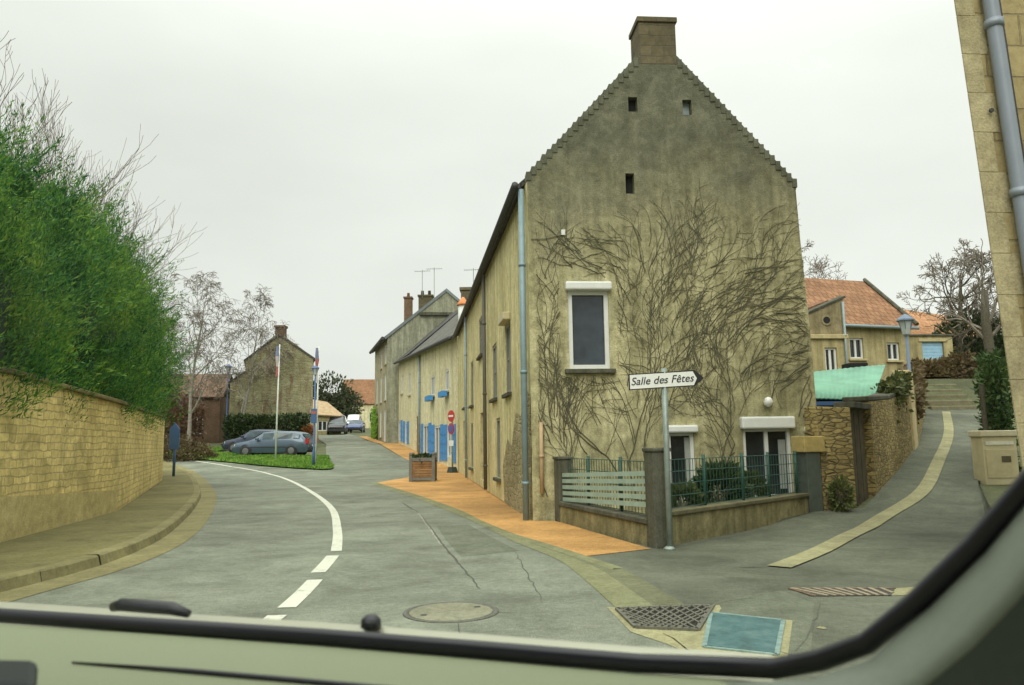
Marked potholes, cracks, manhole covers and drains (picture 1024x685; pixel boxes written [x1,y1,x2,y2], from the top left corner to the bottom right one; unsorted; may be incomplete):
utility cover [702,612,793,658]
drain grate [788,587,914,596]
crack [402,502,480,589]
drain grate [607,604,721,650]
manhole cover [403,601,499,623]
